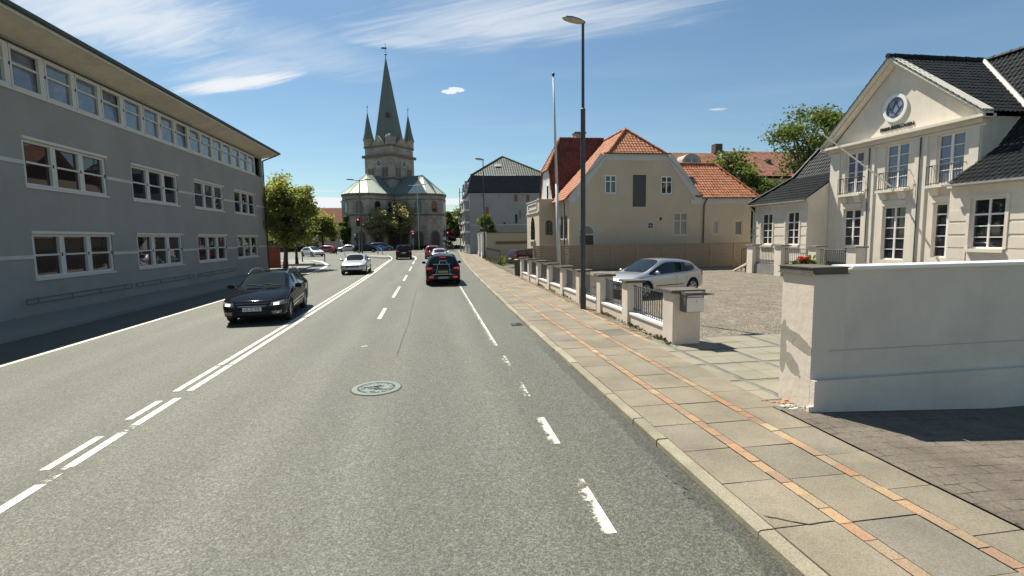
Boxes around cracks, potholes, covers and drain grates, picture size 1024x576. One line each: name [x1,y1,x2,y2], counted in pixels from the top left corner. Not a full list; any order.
manhole cover [350,381,402,396]
